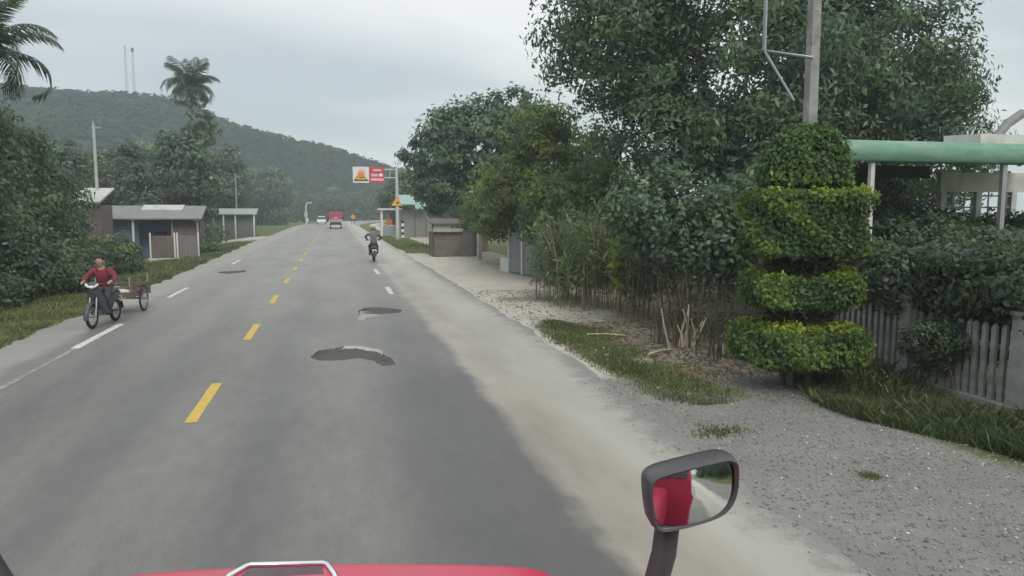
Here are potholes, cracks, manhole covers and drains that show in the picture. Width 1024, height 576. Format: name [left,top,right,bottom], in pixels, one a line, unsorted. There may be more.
pothole [354,307,402,320]
pothole [310,346,395,366]
